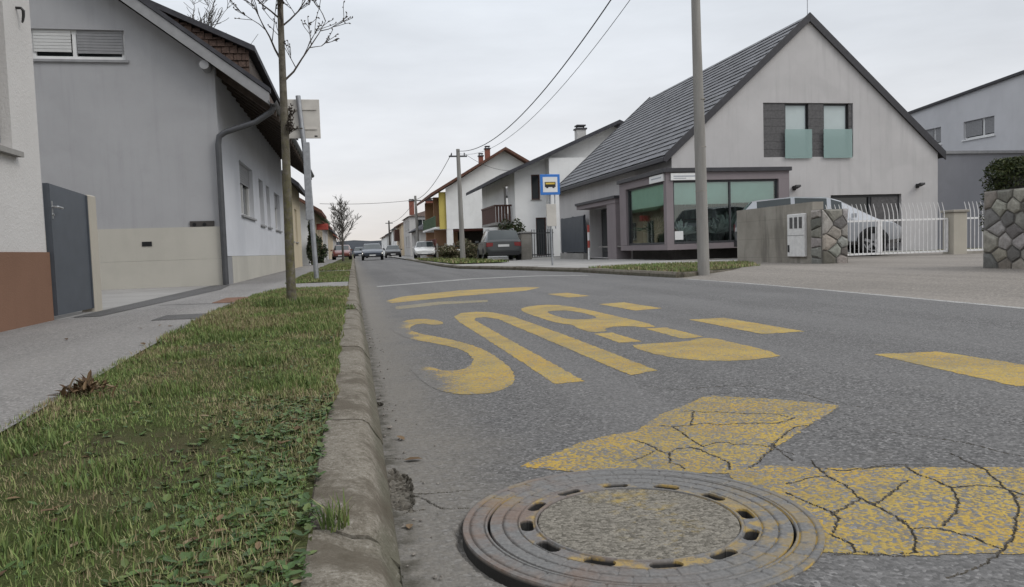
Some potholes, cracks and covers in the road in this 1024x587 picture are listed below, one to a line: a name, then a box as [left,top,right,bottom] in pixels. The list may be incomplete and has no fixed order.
crack [402,490,470,514]
crack [635,411,1024,579]
manhole cover [463,468,825,587]
pothole [387,468,416,513]
